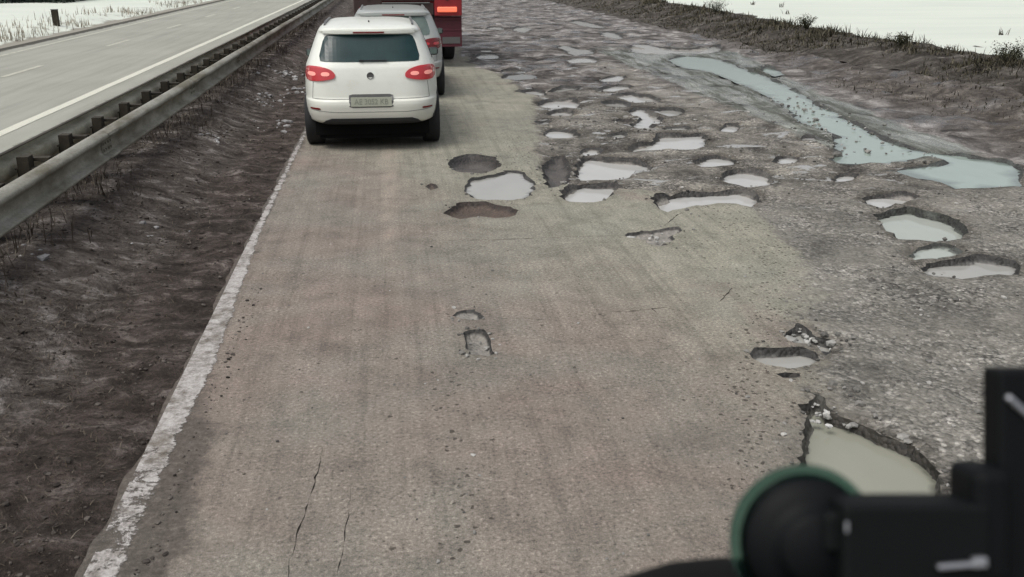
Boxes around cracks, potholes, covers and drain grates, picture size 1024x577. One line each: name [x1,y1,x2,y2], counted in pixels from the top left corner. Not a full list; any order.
crack [288,448,323,577]
pothole [873,206,969,242]
pothole [559,182,623,202]
pothole [464,170,537,200]
pothole [796,393,945,493]
pothole [573,156,653,181]
pothole [831,173,859,182]
pothole [921,254,1021,279]
crack [337,486,351,574]
pothole [453,309,484,320]
pothole [541,155,573,188]
pothole [909,243,964,260]
